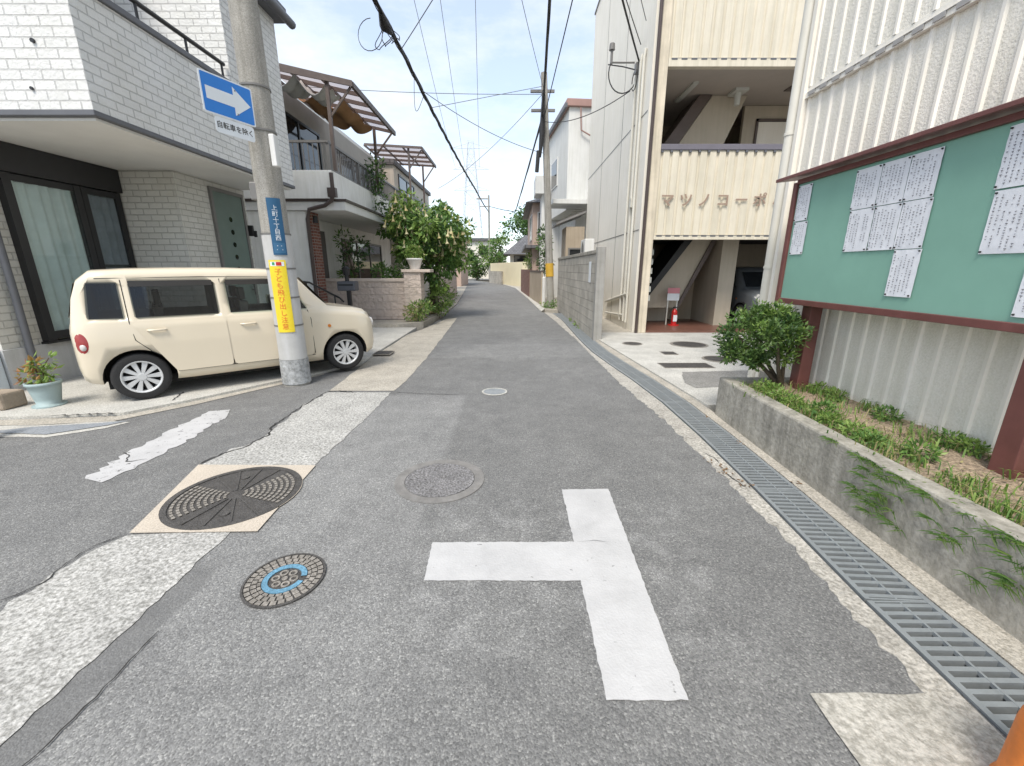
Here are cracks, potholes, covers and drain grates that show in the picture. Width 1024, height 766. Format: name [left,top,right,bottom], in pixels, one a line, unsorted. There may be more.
crack [2,533,125,600]
drain grate [866,600,1024,738]
manhole cover [240,553,326,609]
drain grate [700,435,800,492]
crack [200,390,352,464]
manhole cover [394,460,484,504]
manhole cover [130,465,315,533]
drain grate [757,490,930,603]
drain grate [610,364,652,381]
drain grate [633,379,687,403]
drain grate [663,402,731,437]
crack [22,633,156,766]
